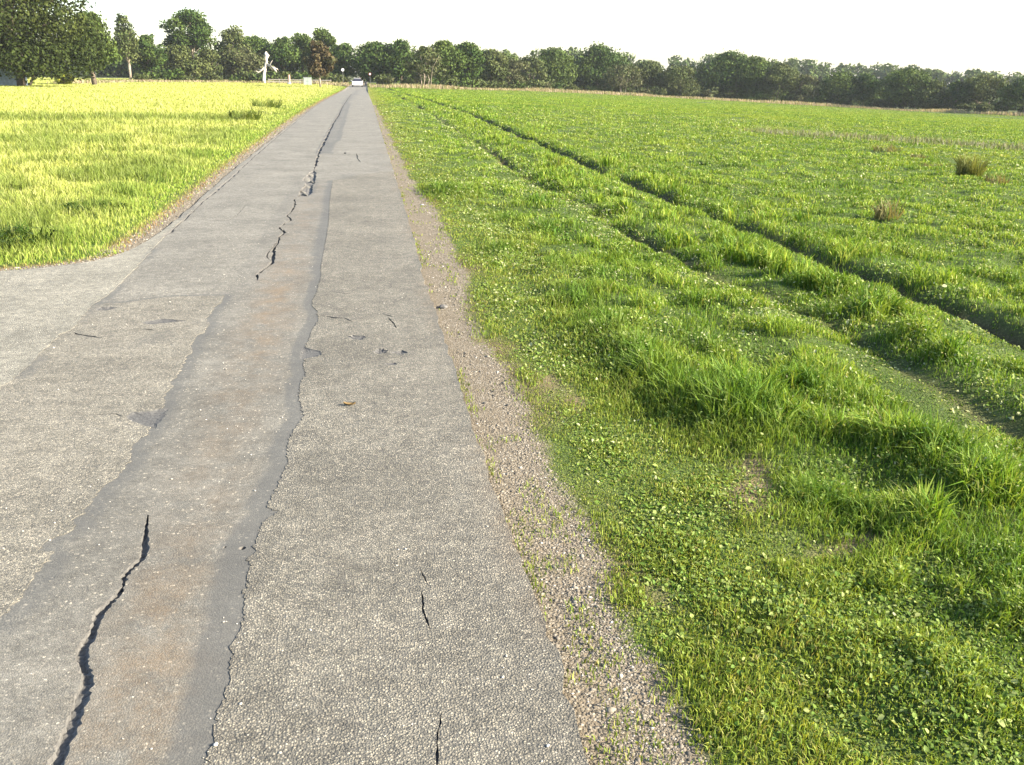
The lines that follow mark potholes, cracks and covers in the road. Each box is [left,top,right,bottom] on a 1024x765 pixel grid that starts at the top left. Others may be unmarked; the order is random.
crack [46,515,150,765]
crack [157,96,360,280]
crack [421,549,430,629]
